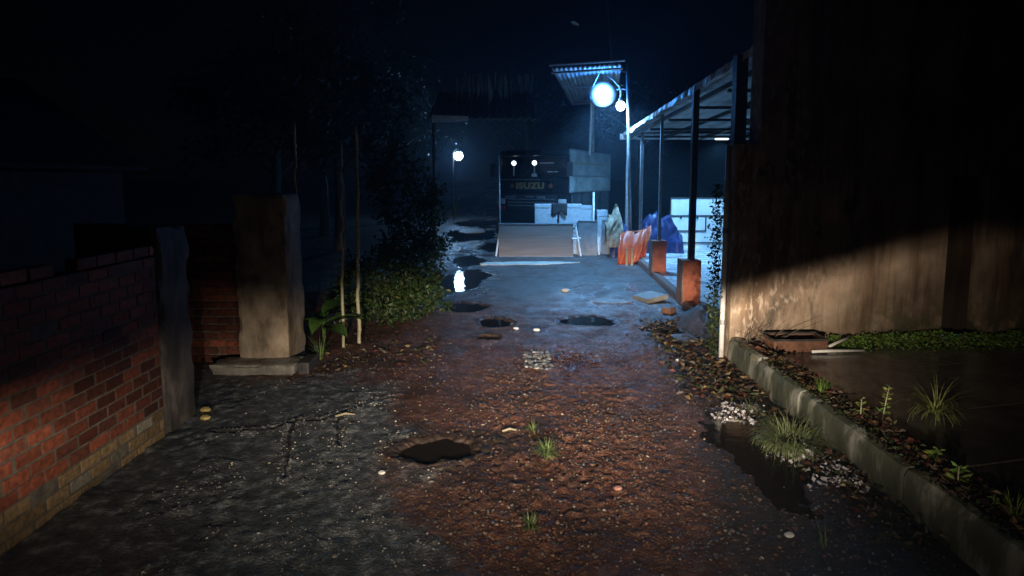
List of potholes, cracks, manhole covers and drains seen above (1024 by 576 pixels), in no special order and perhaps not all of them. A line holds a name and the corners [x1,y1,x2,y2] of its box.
pothole [551,314,622,327]
pothole [471,333,504,341]
crack [214,396,399,478]
pothole [383,433,486,467]
pothole [473,315,519,328]
pothole [436,300,494,313]
